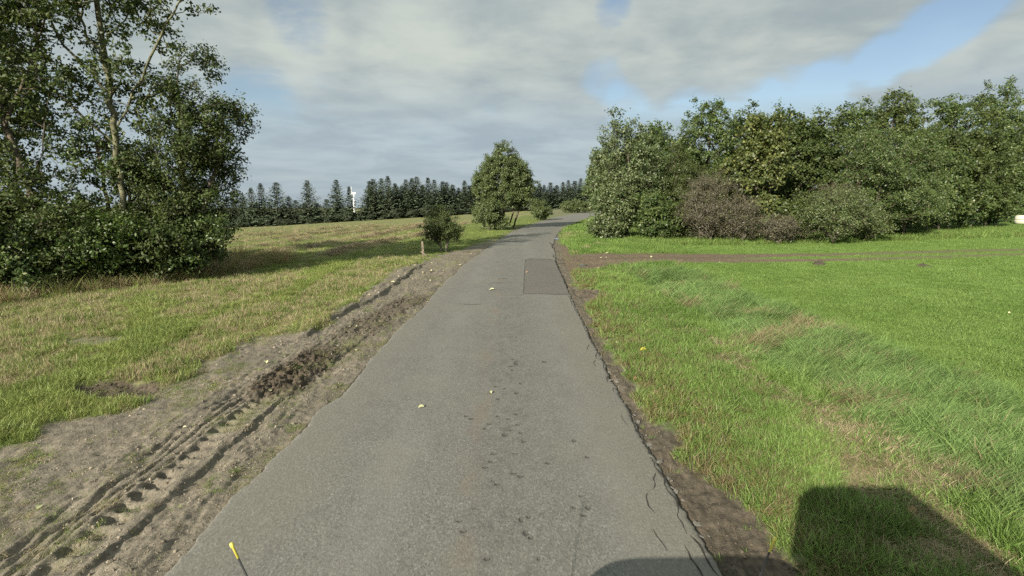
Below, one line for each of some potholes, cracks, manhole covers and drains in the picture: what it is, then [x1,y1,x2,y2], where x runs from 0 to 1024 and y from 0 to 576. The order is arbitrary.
crack [549,242,719,576]
